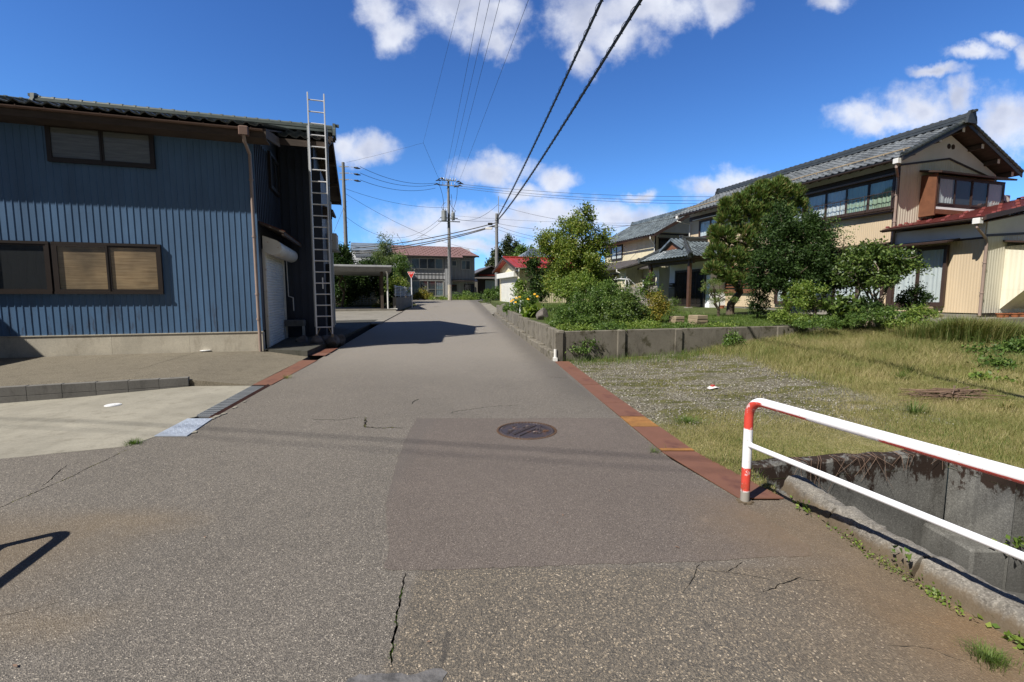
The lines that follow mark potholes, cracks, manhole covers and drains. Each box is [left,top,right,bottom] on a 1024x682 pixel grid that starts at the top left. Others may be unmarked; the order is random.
drain grate [228,386,263,400]
crack [686,562,825,592]
manhole cover [497,421,557,440]
drain grate [196,399,240,418]
crack [388,574,406,668]
